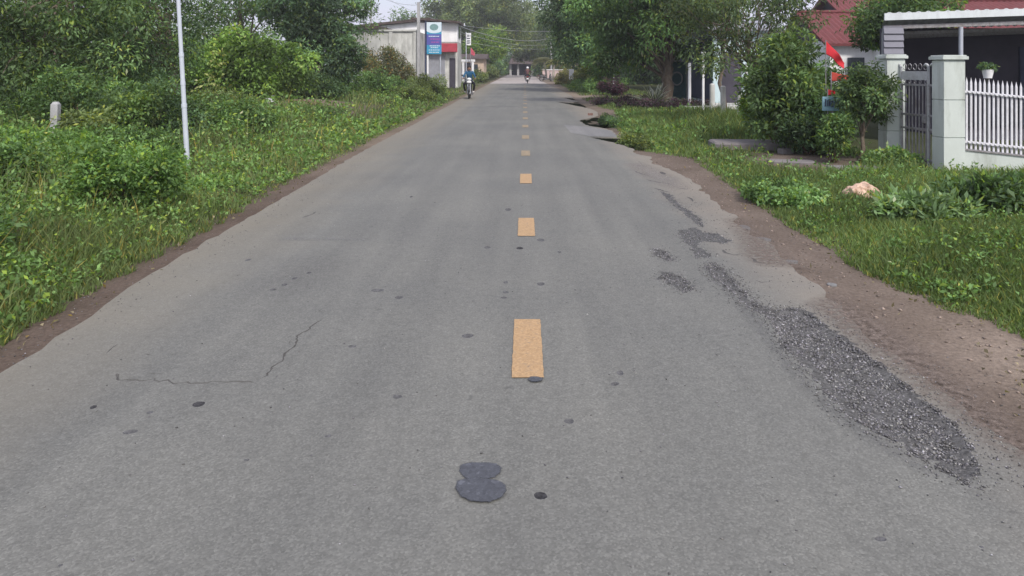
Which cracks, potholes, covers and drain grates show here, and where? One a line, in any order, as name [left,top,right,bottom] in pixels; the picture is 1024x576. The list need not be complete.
pothole [657,271,695,293]
crack [116,320,321,384]
pothole [678,227,732,259]
pothole [580,118,609,128]
pothole [705,262,982,486]
pothole [662,192,705,227]
